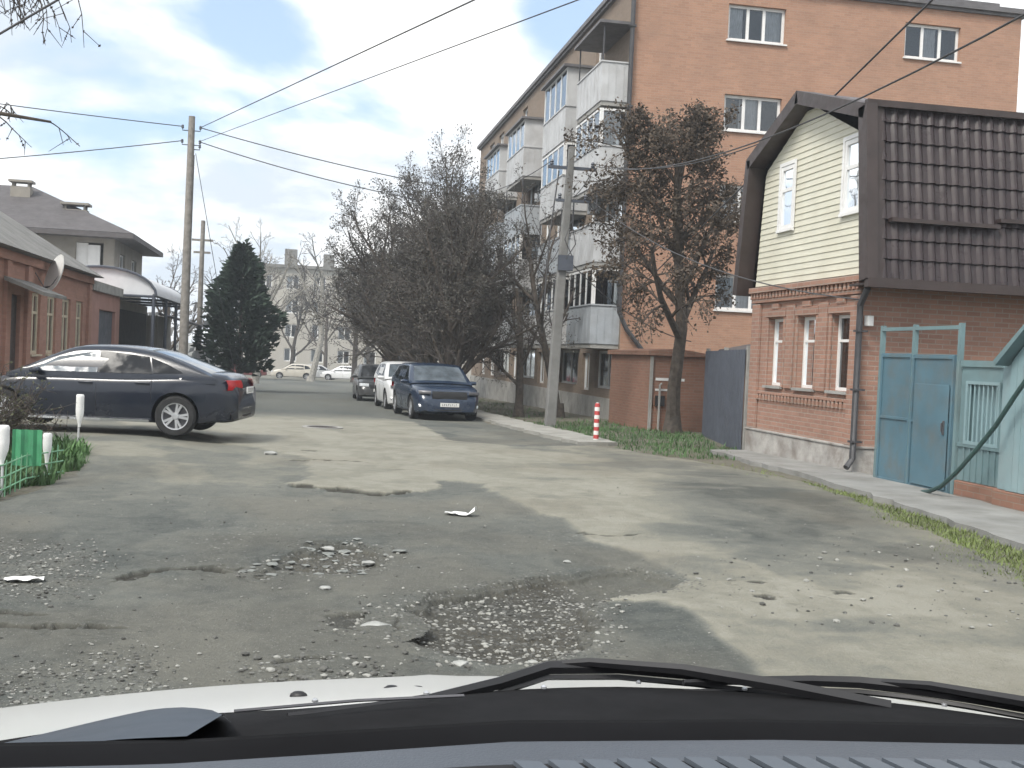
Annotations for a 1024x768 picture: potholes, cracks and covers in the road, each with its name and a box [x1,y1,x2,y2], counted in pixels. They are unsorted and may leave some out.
pothole [356,565,704,672]
pothole [731,590,802,604]
pothole [810,587,880,600]
crack [560,529,655,539]
pothole [303,608,432,641]
pothole [226,537,405,583]
